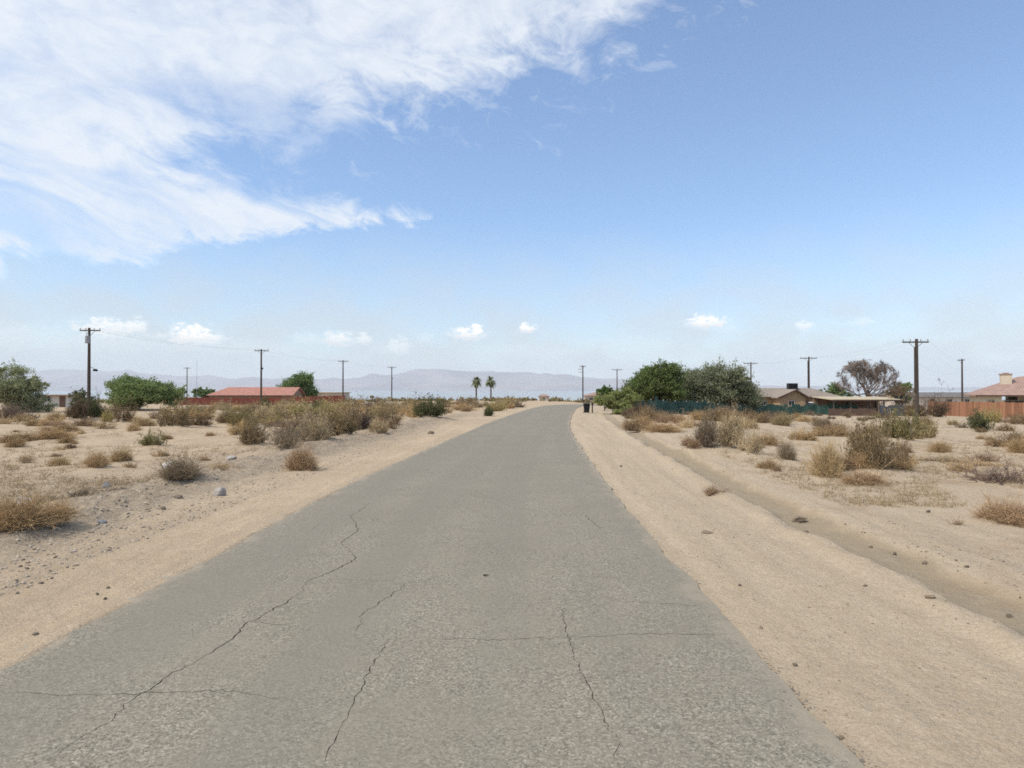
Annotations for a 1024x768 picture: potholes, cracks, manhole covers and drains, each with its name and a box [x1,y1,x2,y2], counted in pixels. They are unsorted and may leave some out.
crack [3,506,406,766]
crack [416,610,726,766]
